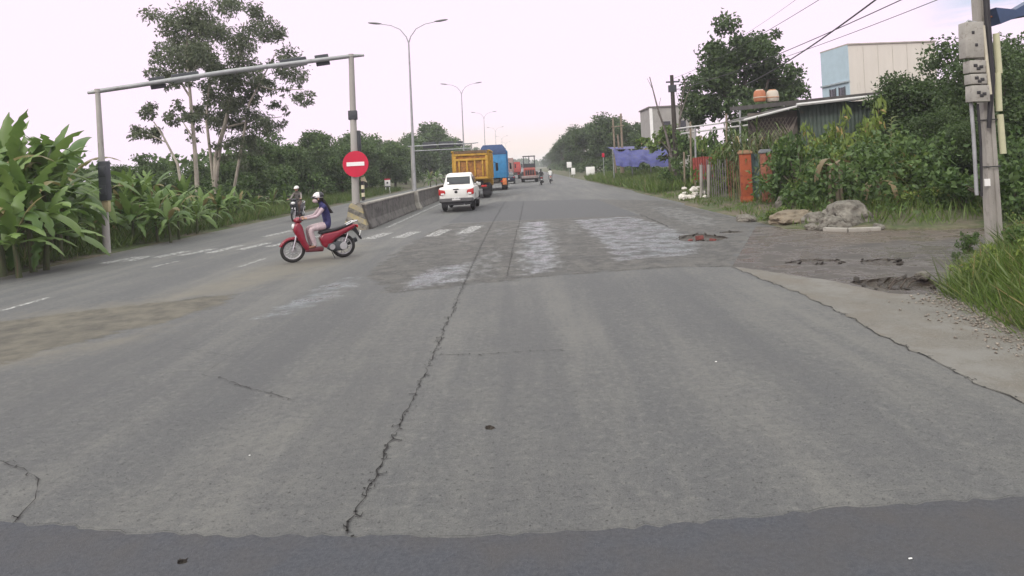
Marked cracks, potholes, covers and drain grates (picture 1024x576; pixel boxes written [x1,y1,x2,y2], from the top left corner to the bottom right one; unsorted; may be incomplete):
pothole [851,274,943,290]
pothole [676,232,727,241]
crack [343,202,560,537]
crack [3,460,39,523]
